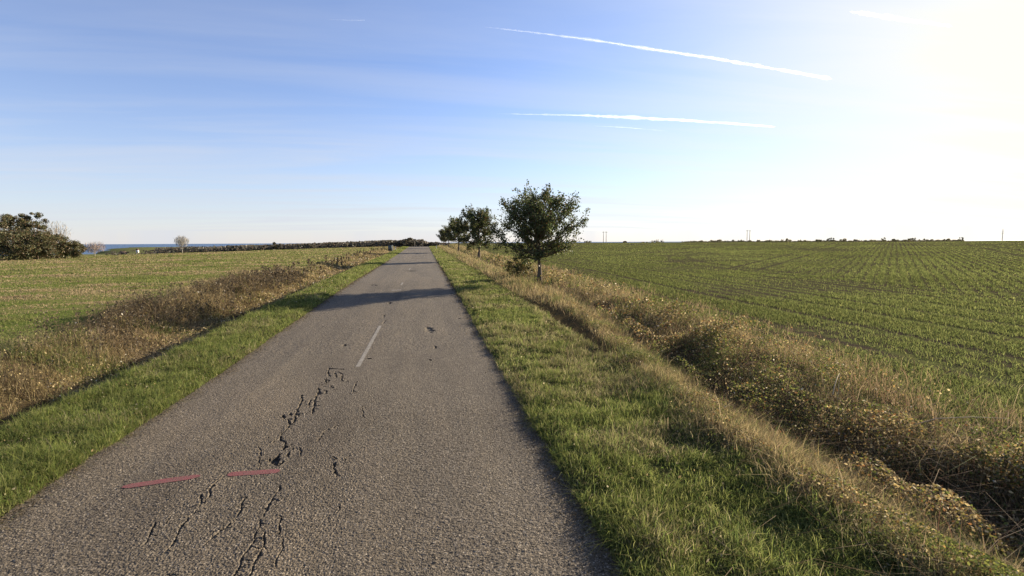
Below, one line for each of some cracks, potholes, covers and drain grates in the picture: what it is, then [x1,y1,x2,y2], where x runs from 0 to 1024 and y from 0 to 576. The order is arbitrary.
crack [141,475,284,576]
crack [258,366,366,477]
